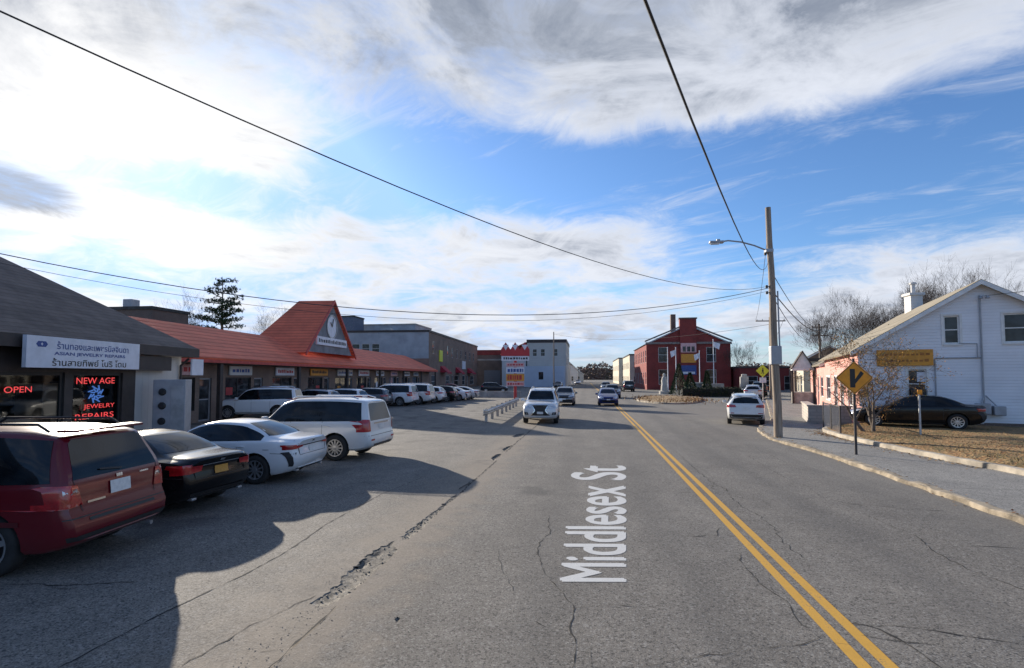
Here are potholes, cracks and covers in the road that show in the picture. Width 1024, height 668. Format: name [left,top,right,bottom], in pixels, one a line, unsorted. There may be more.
crack [853,623,1024,668]
crack [749,445,1024,590]
